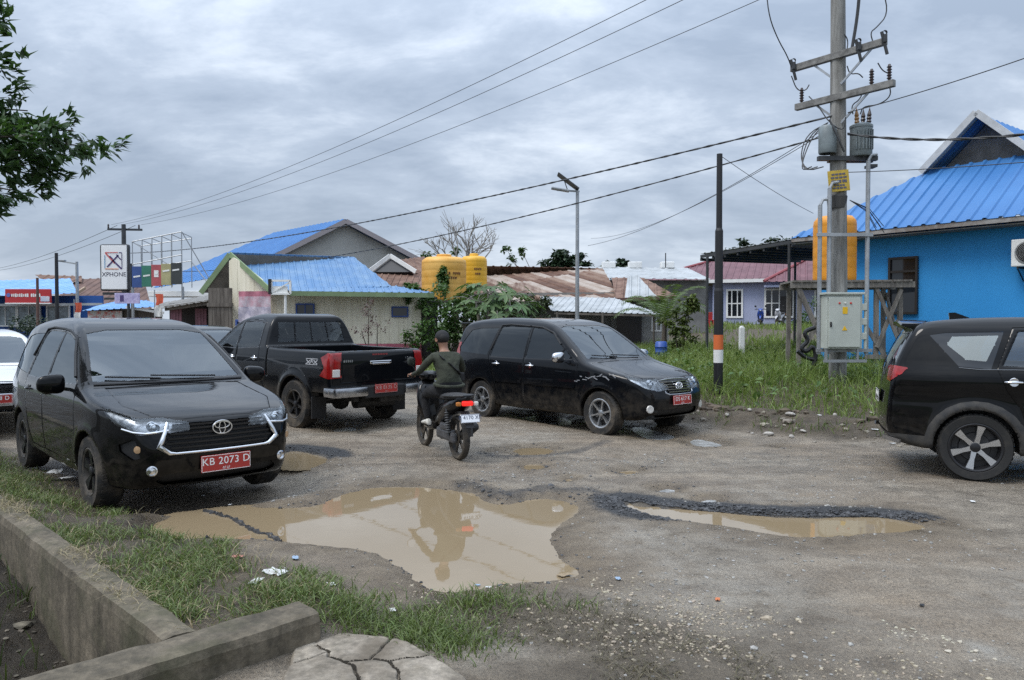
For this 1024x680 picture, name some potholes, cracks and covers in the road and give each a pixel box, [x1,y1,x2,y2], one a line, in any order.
pothole [511,458,558,473]
pothole [131,481,598,596]
pothole [587,493,946,537]
pothole [504,443,566,455]
crack [293,641,429,680]
pothole [280,445,359,473]
crack [203,509,282,542]
